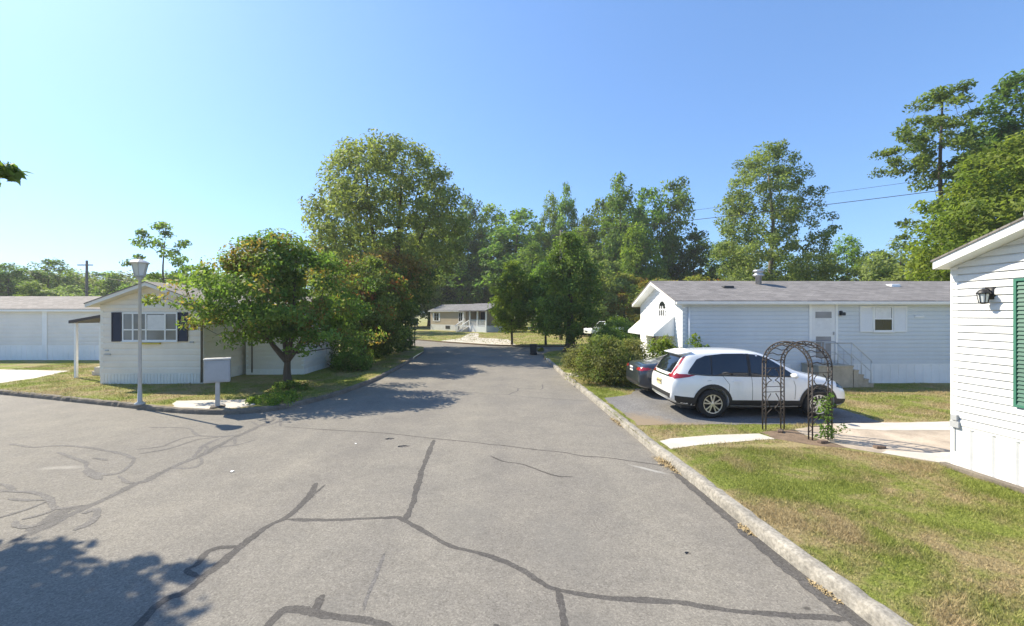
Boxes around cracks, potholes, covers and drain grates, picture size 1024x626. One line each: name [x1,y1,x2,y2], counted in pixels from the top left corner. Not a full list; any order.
crack [0,420,847,626]
crack [453,384,587,401]
